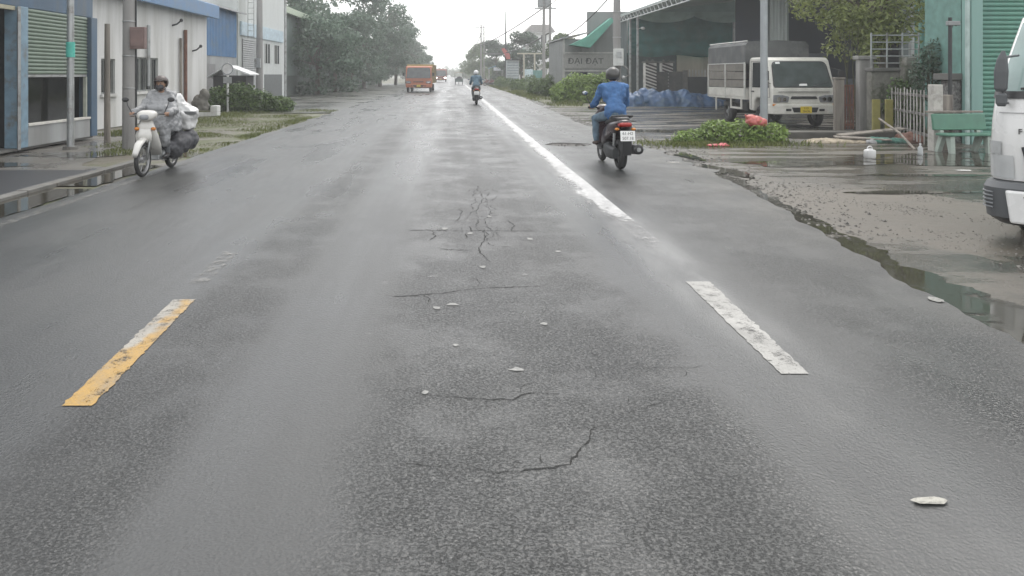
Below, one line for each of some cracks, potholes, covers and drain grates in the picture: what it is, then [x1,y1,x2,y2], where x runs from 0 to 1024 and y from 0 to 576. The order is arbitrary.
crack [391,279,534,302]
crack [431,186,545,260]
crack [408,398,674,481]
crack [416,382,552,410]
